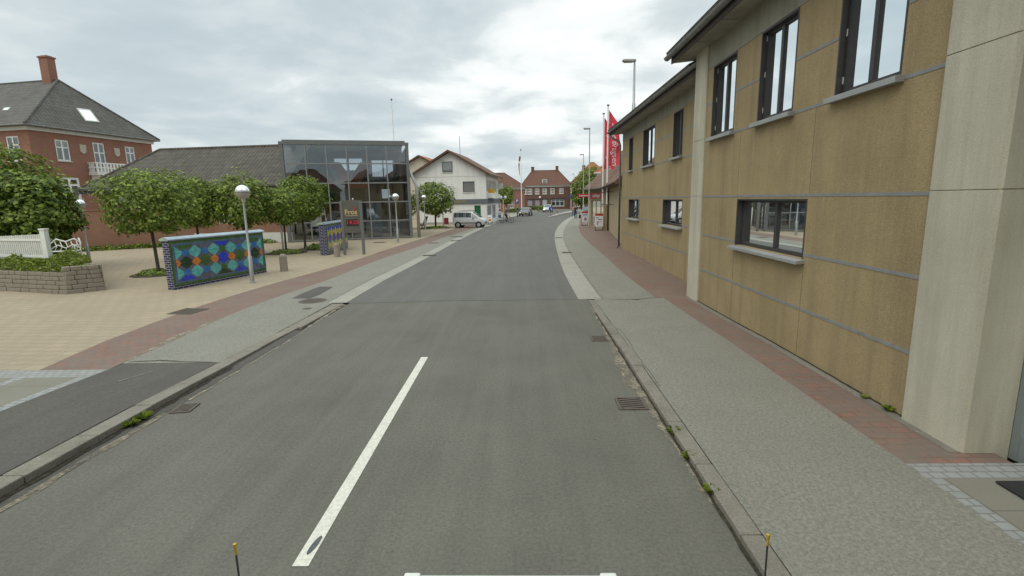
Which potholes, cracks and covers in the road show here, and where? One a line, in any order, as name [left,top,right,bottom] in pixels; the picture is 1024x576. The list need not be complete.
drain grate [169,403,200,414]
drain grate [614,397,649,410]
